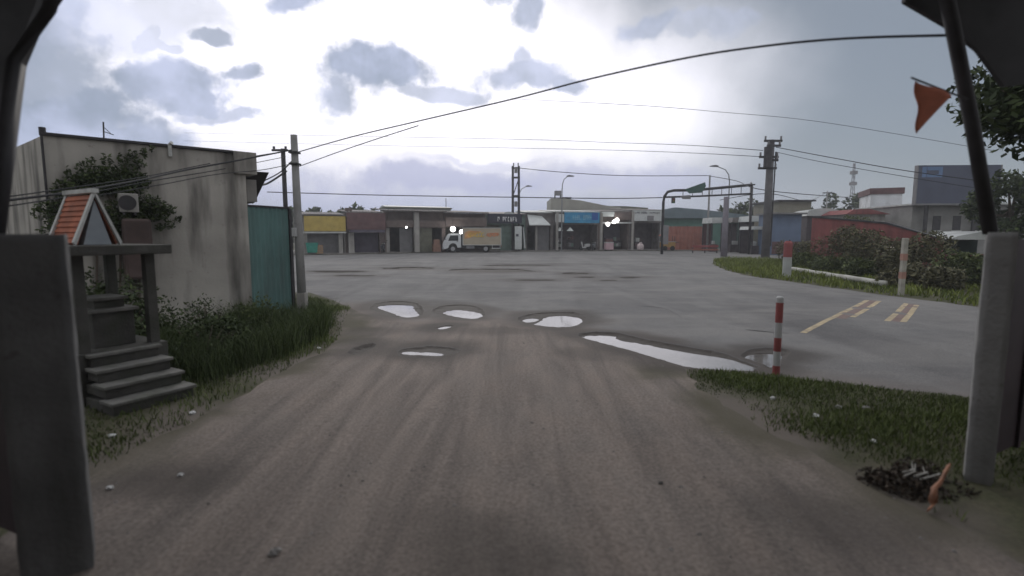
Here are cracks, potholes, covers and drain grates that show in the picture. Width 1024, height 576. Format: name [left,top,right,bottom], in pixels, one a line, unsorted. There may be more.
pothole [347,343,377,355]
pothole [431,304,485,319]
pothole [397,346,461,358]
pothole [740,347,792,368]
pothole [369,301,425,317]
pothole [578,332,760,371]
pothole [518,312,586,327]
